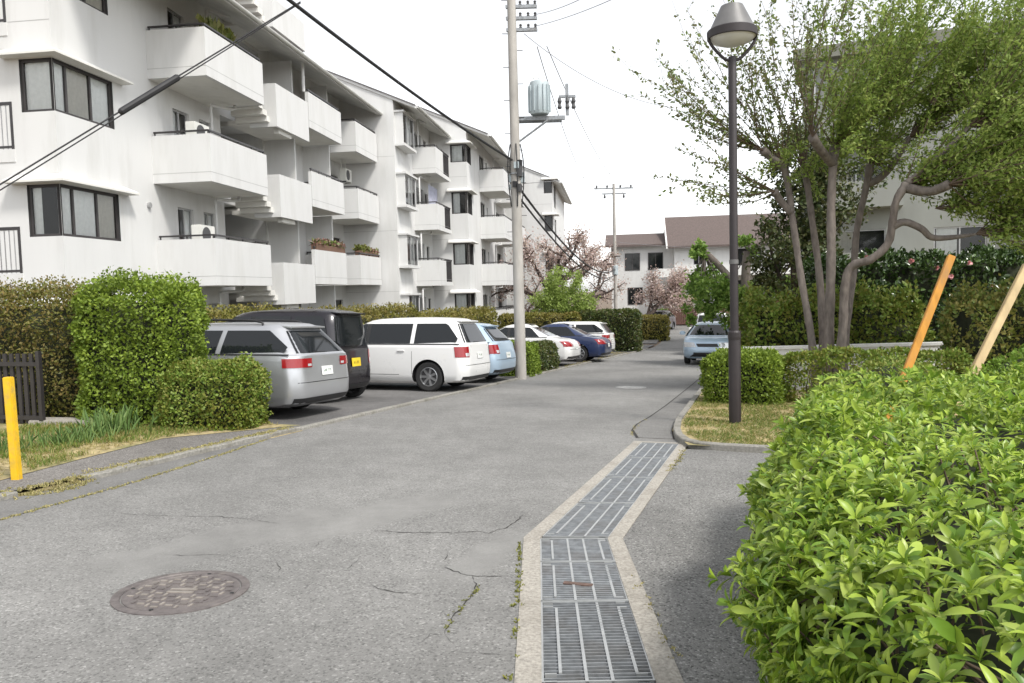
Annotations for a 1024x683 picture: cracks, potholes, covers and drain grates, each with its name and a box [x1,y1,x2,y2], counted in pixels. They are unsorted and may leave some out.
drain grate [541,600,656,683]
crack [391,514,524,533]
drain grate [606,457,668,477]
drain grate [578,477,653,503]
manhole cover [110,570,250,616]
drain grate [540,561,628,602]
drain grate [626,442,678,458]
crack [422,555,500,655]
drain grate [540,538,615,562]
drain grate [542,503,634,538]
